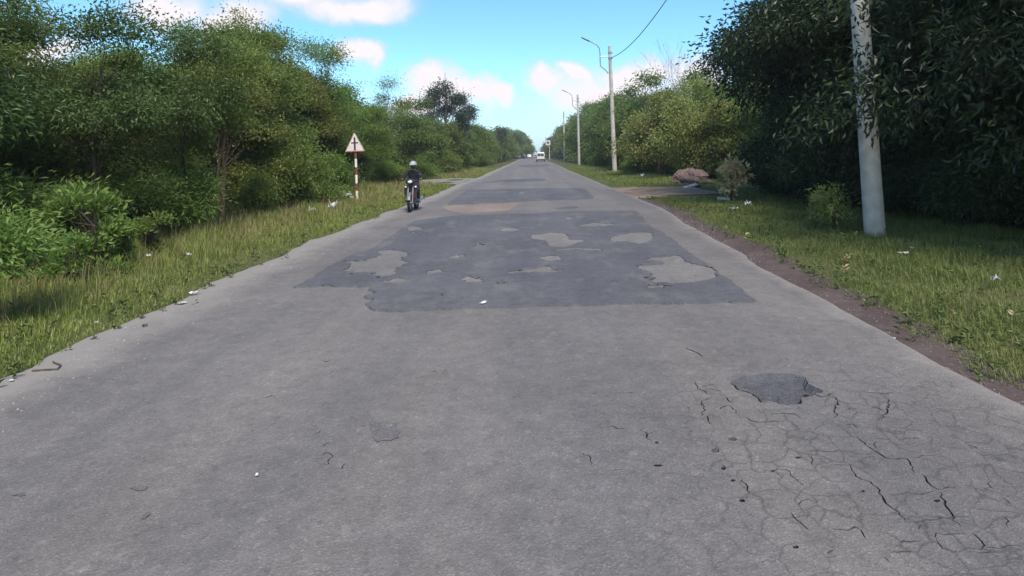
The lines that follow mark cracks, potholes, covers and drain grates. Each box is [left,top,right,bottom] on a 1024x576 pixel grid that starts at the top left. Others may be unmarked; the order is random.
crack [688,382,1019,561]
